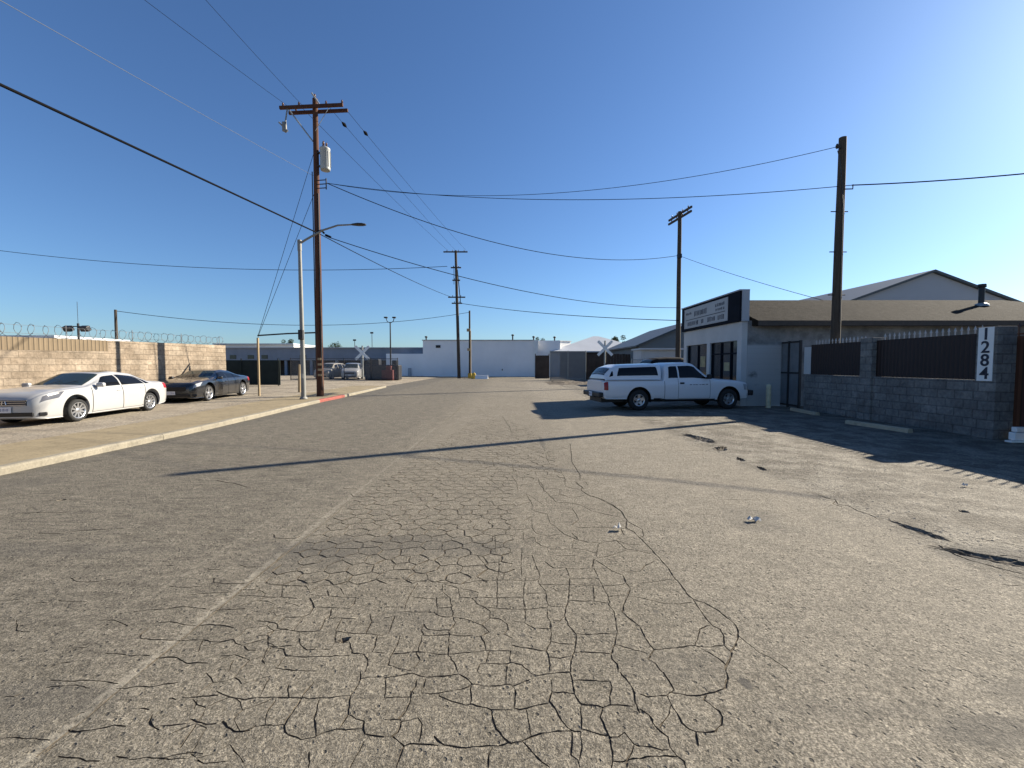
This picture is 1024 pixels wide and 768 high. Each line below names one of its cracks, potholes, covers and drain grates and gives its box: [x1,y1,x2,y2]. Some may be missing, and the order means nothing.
pothole [889,520,952,542]
pothole [924,544,1024,567]
crack [7,415,792,768]
pothole [682,433,717,444]
